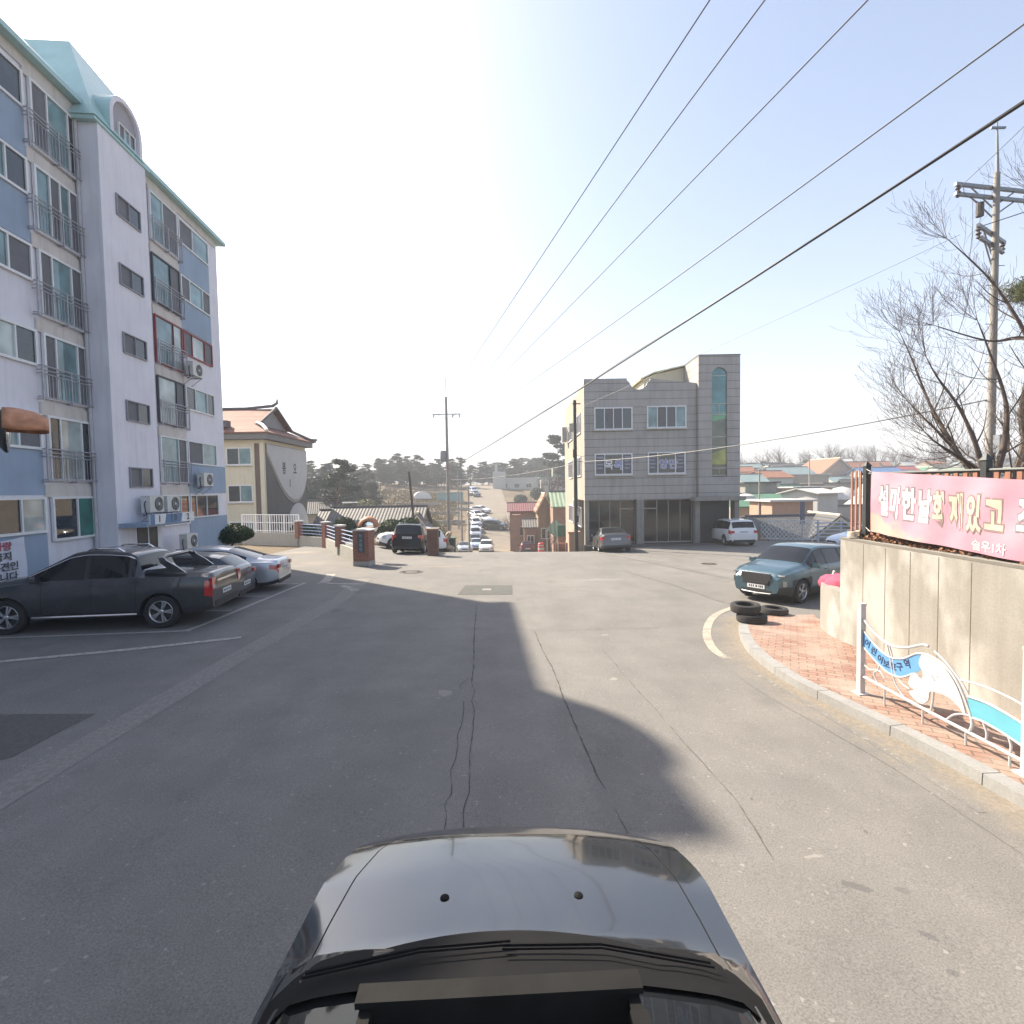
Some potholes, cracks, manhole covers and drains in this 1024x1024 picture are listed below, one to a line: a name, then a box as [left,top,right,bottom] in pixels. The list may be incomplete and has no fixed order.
crack [534,631,628,834]
crack [444,605,477,829]
manhole cover [457,585,512,595]
crack [602,649,773,858]
